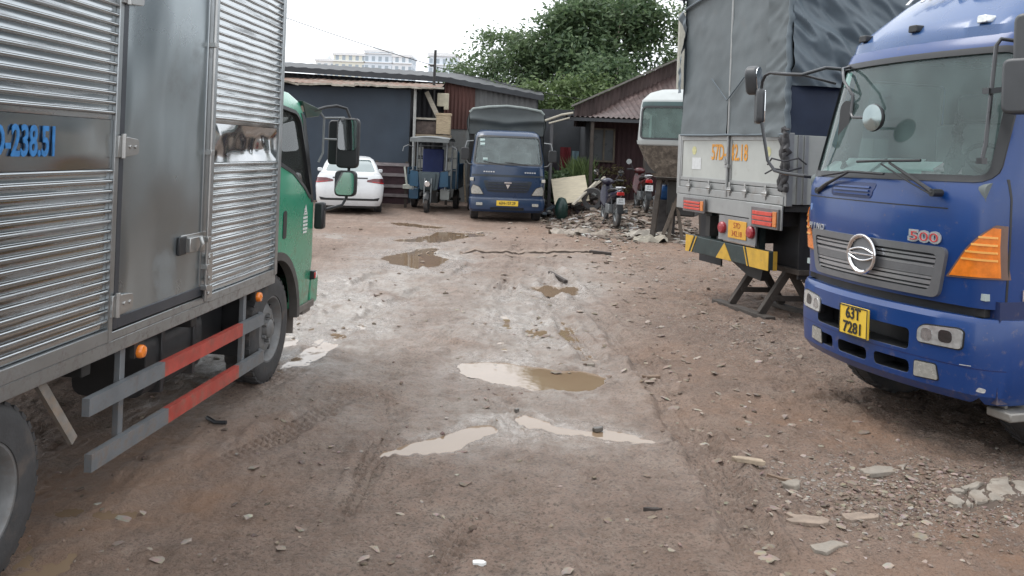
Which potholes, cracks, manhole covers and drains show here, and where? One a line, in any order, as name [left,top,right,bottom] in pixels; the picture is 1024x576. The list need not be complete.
crack [459,247,593,257]
pothole [381,221,458,230]
pothole [500,410,673,449]
pothole [367,245,459,271]
pothole [515,280,596,299]
pothole [366,418,510,462]
pothole [381,230,498,244]
pothole [445,357,621,395]
